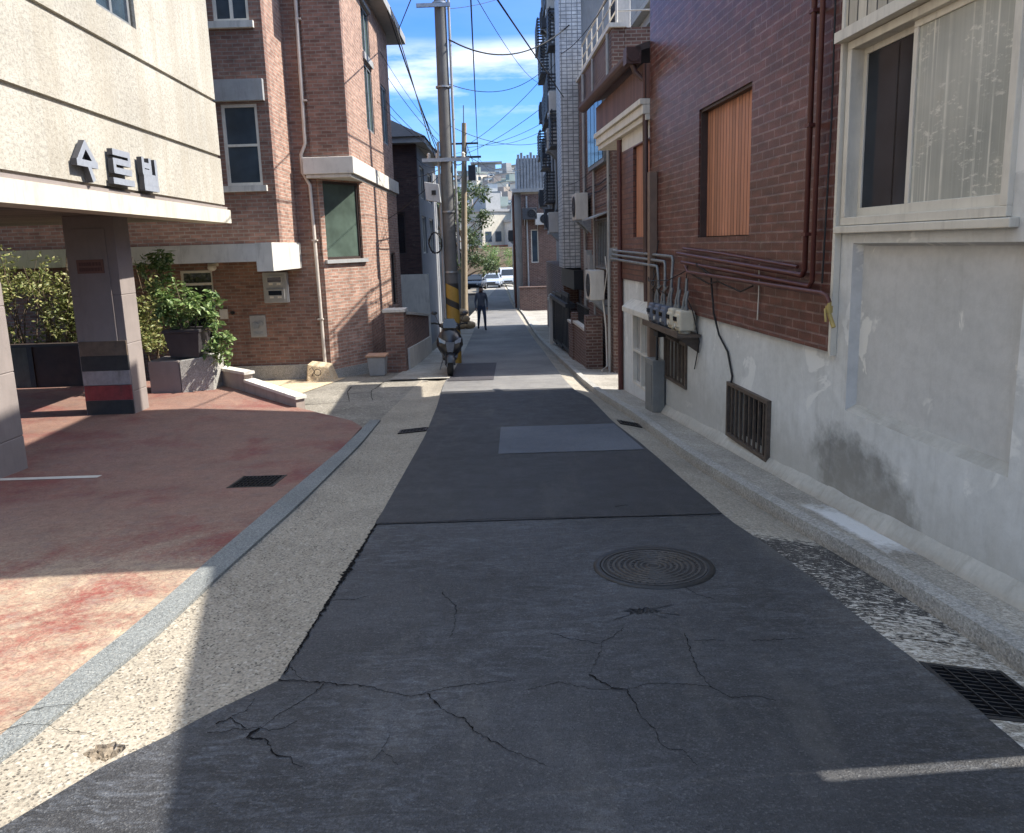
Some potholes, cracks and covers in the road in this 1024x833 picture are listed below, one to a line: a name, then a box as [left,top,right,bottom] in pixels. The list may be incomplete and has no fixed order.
crack [207,664,546,767]
manhole cover [593,546,715,589]
pothole [83,742,126,763]
drain grate [919,661,1024,723]
drain grate [226,475,287,488]
pothole [621,607,661,615]
crack [528,628,776,765]
